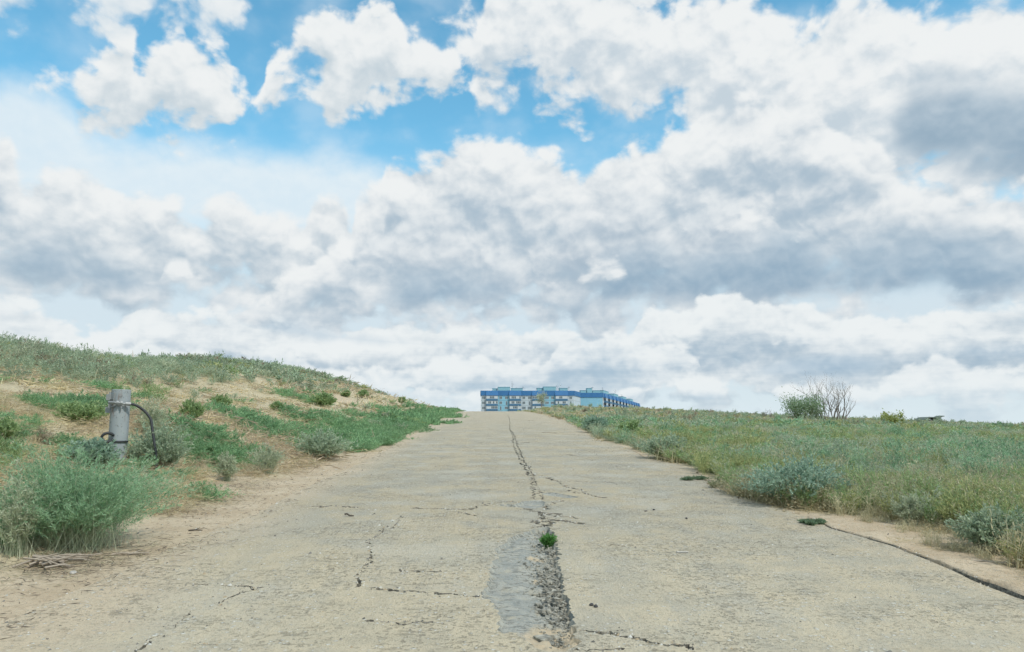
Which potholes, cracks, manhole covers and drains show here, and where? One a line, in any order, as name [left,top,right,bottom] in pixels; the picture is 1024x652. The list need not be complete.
crack [134,584,263,652]
crack [312,414,617,597]
crack [573,630,694,652]
